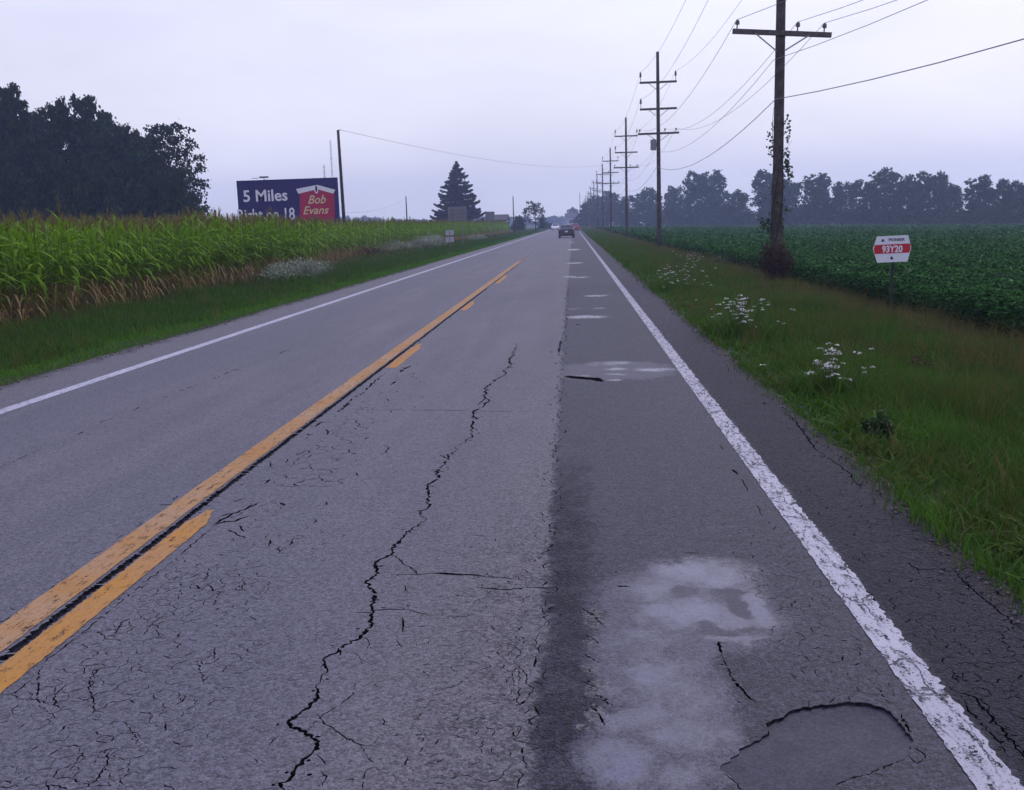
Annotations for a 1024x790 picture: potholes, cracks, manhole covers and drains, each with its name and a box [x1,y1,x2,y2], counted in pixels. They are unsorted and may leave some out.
crack [713,521,926,790]
crack [0,348,550,790]
pothole [720,702,913,790]
crack [771,448,1024,760]
crack [784,411,863,490]
